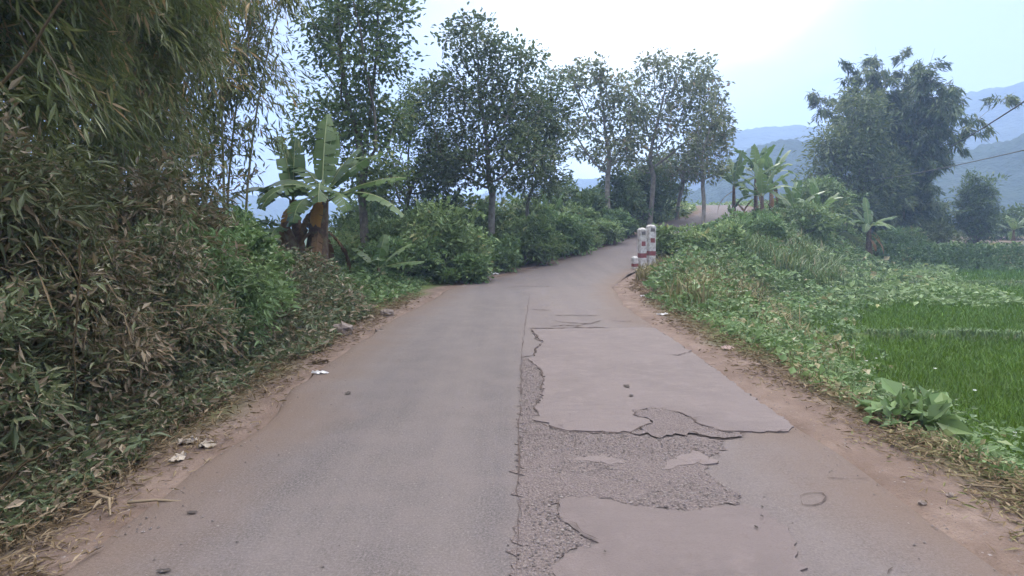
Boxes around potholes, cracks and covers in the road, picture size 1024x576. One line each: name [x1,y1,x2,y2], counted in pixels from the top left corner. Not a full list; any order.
crack [520,315,649,436]
pothole [631,406,743,438]
